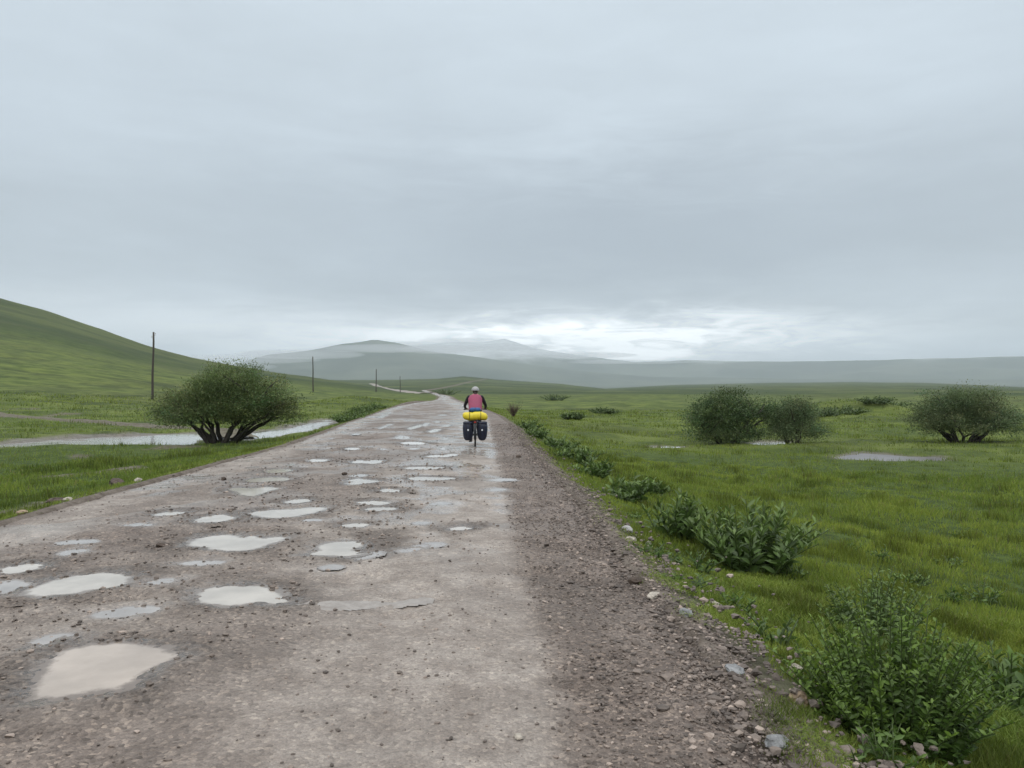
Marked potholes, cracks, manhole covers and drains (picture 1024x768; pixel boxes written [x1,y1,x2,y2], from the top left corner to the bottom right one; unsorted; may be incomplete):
pothole [0,635,221,716]
pothole [217,485,291,497]
pothole [172,577,311,610]
pothole [176,530,303,556]
pothole [236,504,339,520]
pothole [278,538,390,562]
pothole [0,559,62,576]
pothole [0,565,150,607]
